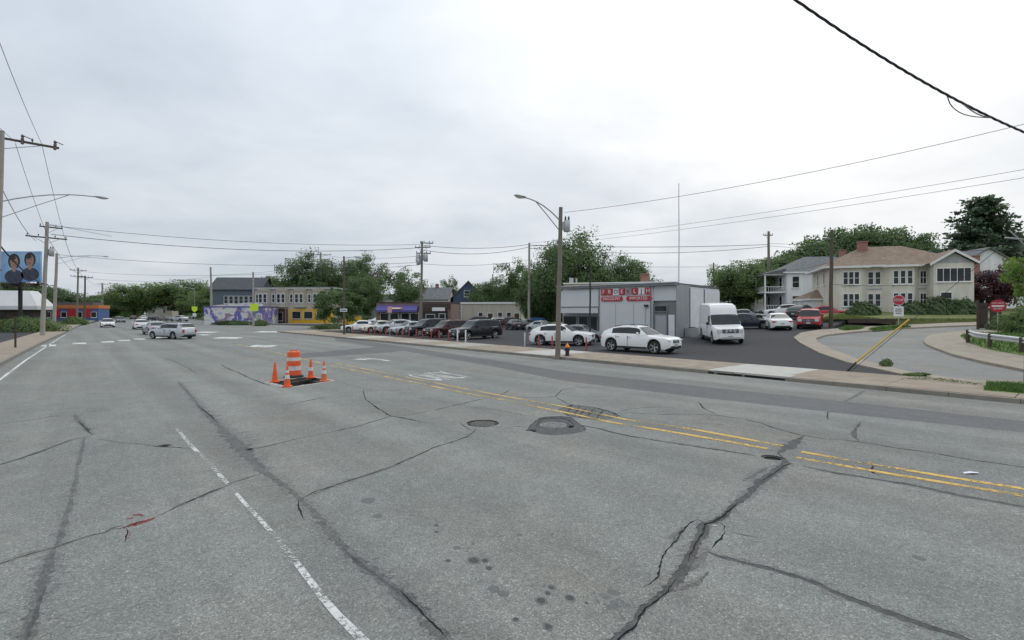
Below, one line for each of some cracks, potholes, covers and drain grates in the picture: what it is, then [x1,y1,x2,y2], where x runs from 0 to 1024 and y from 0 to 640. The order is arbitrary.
crack [254,385,1024,640]
crack [0,404,230,565]
pothole [271,377,331,387]
manhole cover [528,416,586,435]
